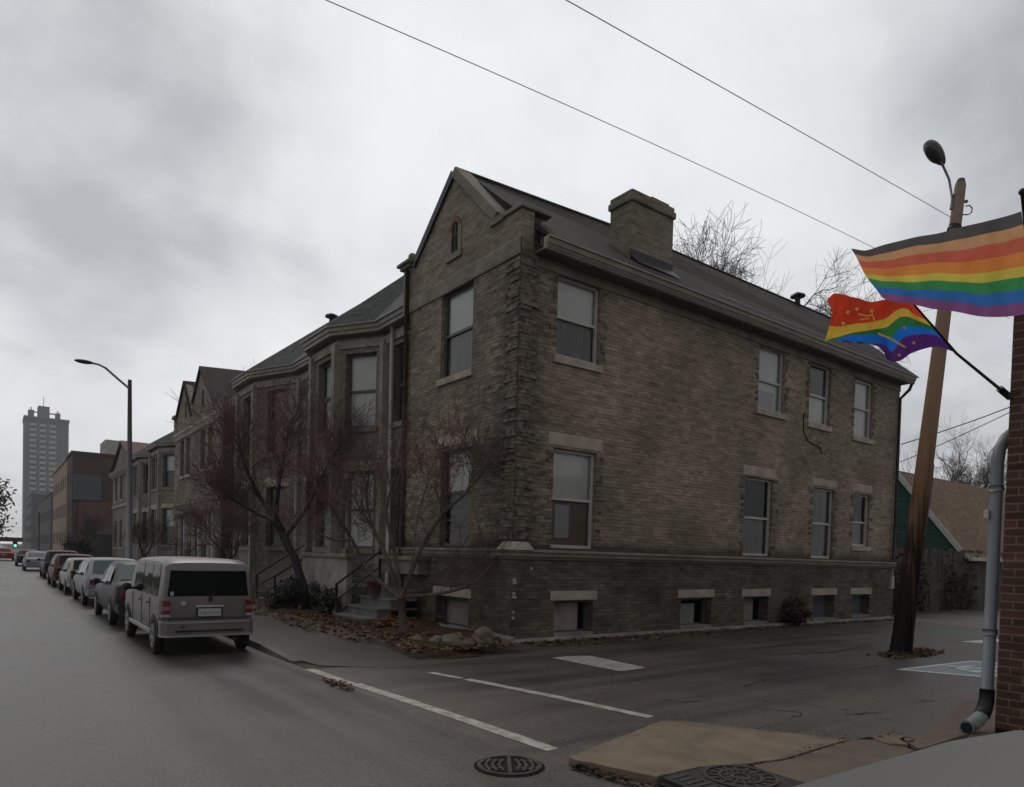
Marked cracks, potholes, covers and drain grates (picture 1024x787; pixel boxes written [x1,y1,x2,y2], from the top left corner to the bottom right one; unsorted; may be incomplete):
manhole cover [474,755,545,777]
